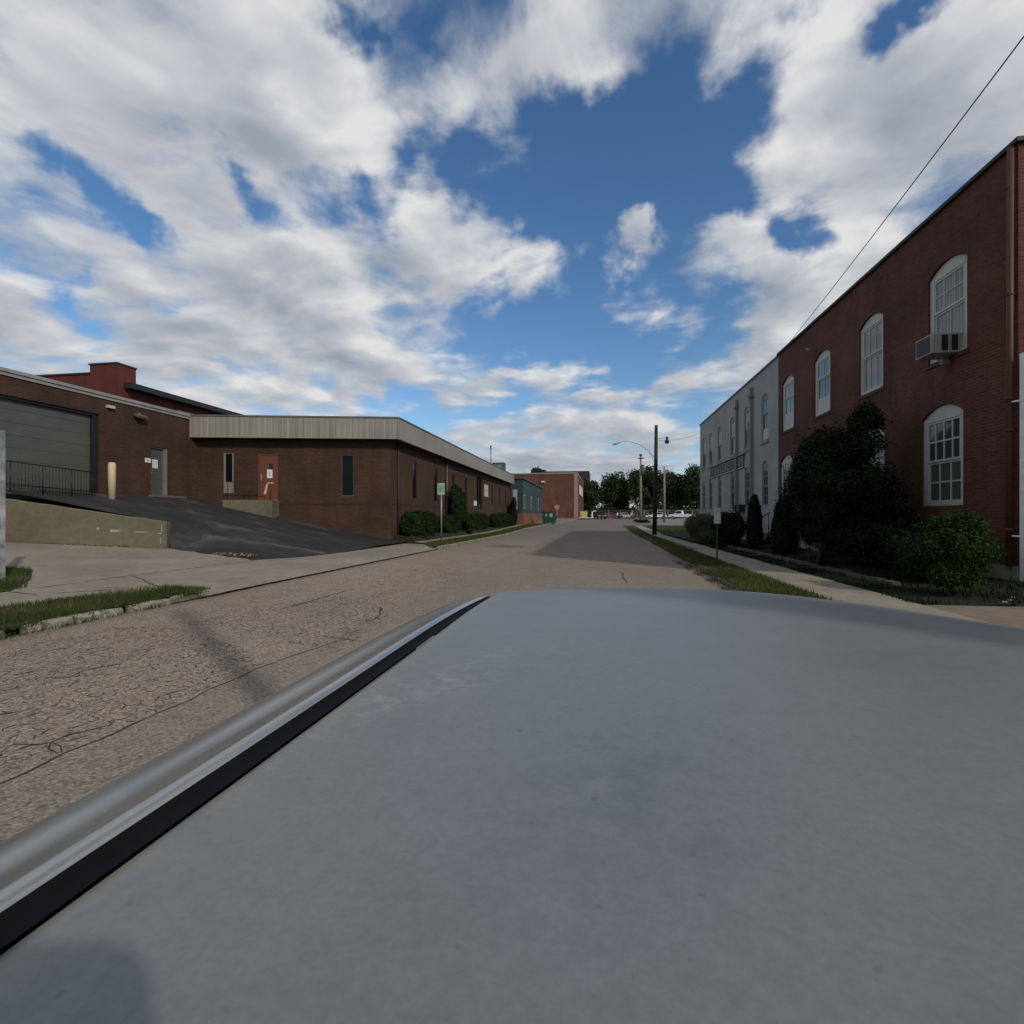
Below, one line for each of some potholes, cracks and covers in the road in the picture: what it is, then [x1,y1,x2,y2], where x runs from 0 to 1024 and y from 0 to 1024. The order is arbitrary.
crack [0,627,254,776]
crack [194,568,464,650]
